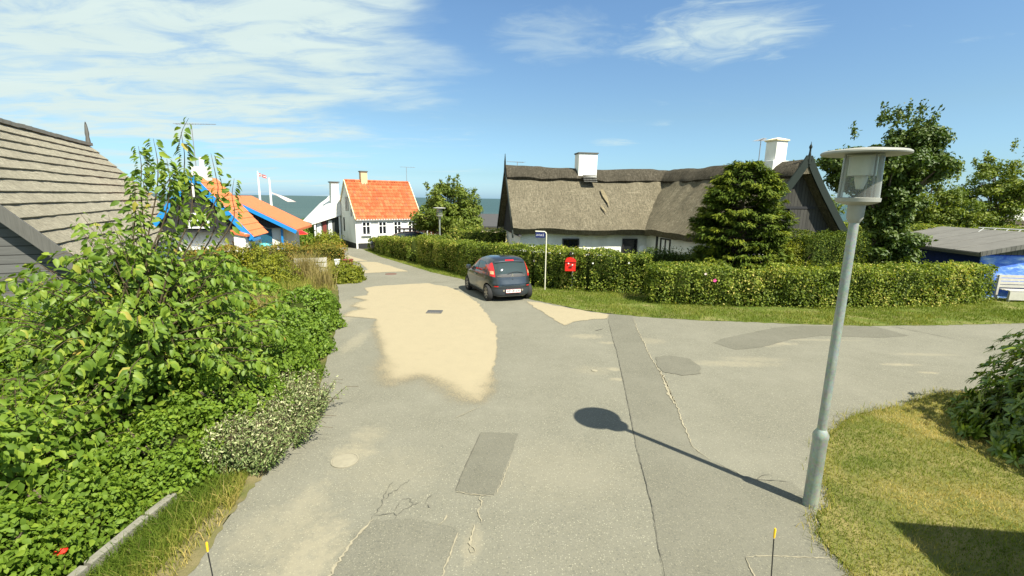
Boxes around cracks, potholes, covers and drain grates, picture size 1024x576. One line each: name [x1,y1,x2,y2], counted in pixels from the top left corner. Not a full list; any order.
manhole cover [331,453,359,468]
crack [328,435,511,576]
crack [634,322,789,482]
